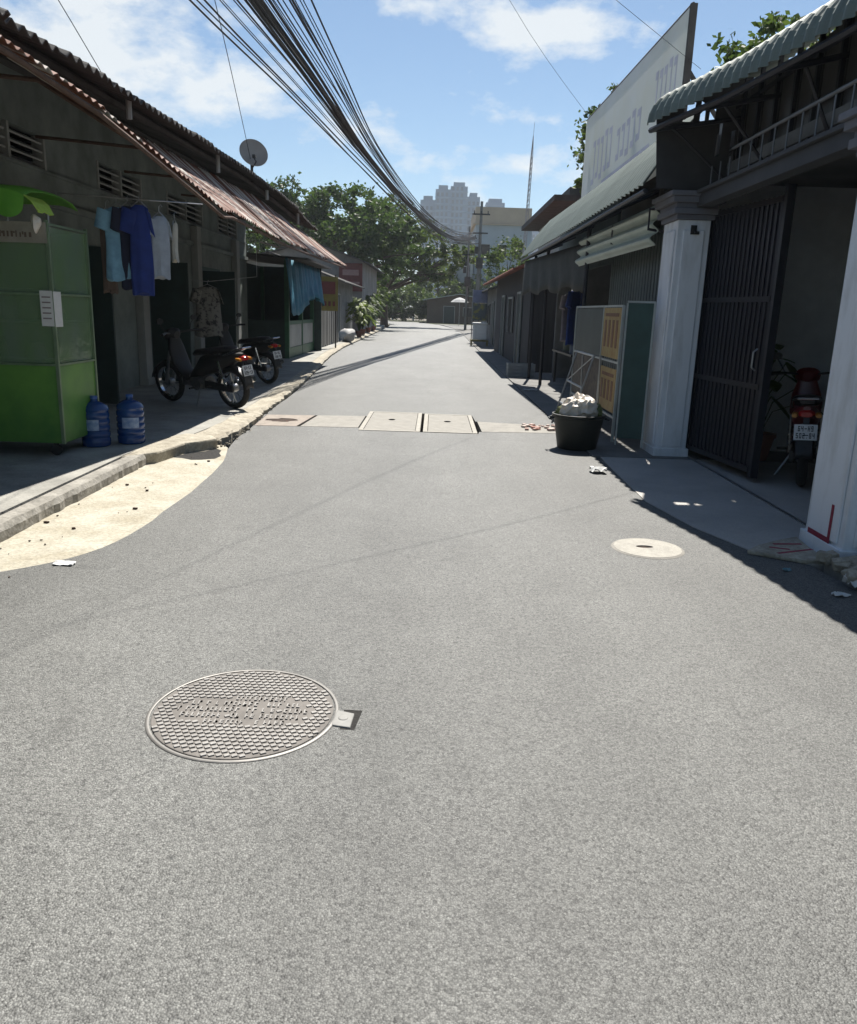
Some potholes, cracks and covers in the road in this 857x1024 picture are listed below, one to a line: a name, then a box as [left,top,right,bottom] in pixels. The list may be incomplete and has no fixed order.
manhole cover [358,411,422,432]
manhole cover [611,538,685,559]
manhole cover [423,414,478,434]
manhole cover [145,669,354,763]
